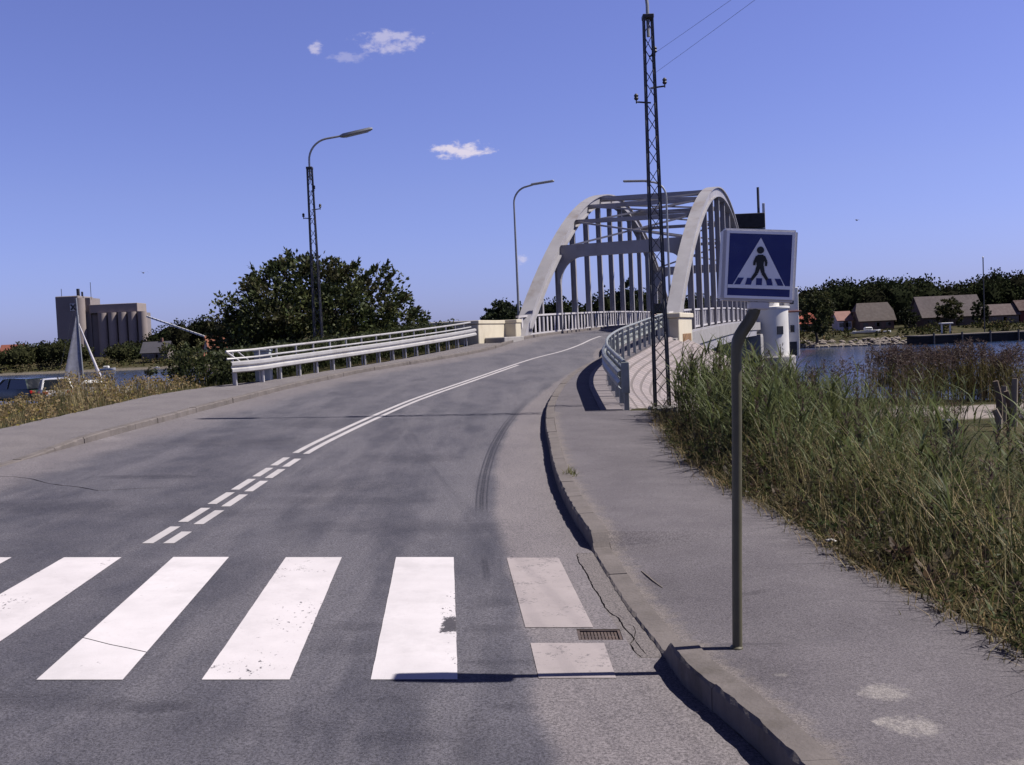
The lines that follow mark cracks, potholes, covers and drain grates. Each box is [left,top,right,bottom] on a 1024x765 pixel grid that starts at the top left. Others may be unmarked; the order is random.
drain grate [577,630,623,640]
crack [0,476,139,491]
crack [576,553,651,658]
